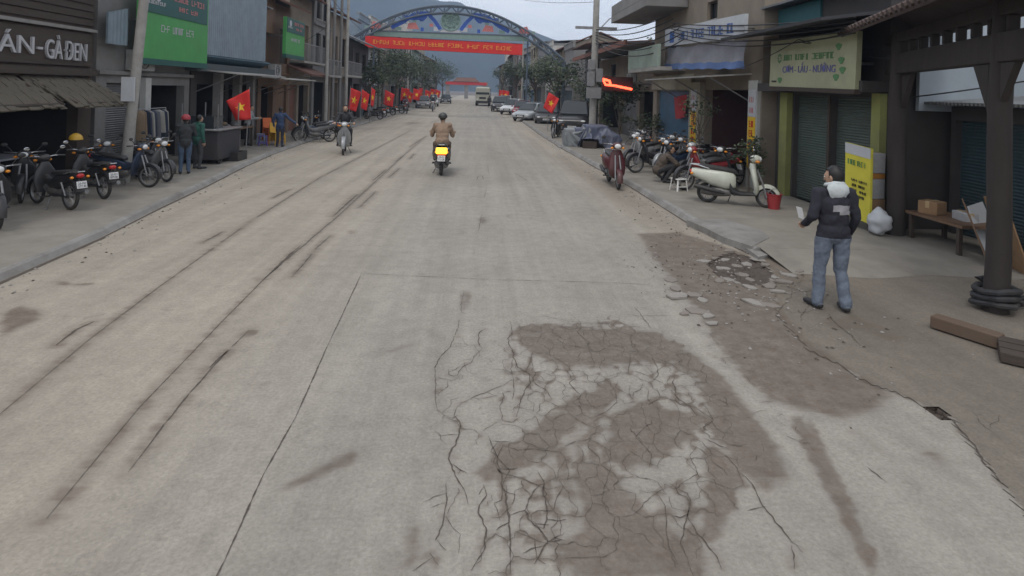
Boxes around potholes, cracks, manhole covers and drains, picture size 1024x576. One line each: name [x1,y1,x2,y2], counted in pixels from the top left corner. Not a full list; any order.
crack [413,293,808,576]
pothole [706,253,774,285]
crack [768,273,857,342]
pothole [916,402,956,425]
